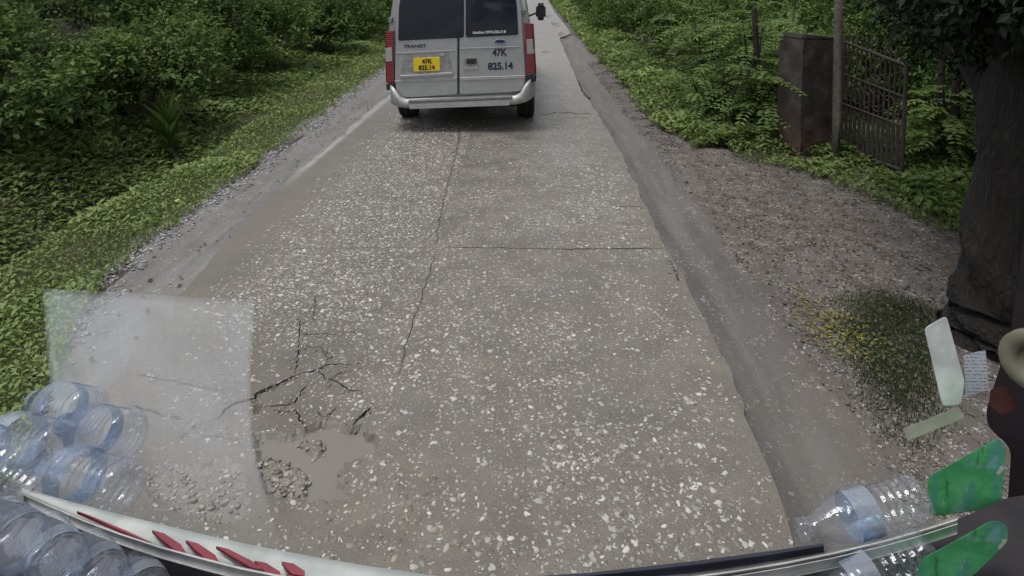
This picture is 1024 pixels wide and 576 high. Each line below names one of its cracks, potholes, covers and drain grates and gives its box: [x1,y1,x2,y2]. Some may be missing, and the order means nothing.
crack [665,261,682,283]
pothole [249,419,386,503]
crack [125,295,376,445]
